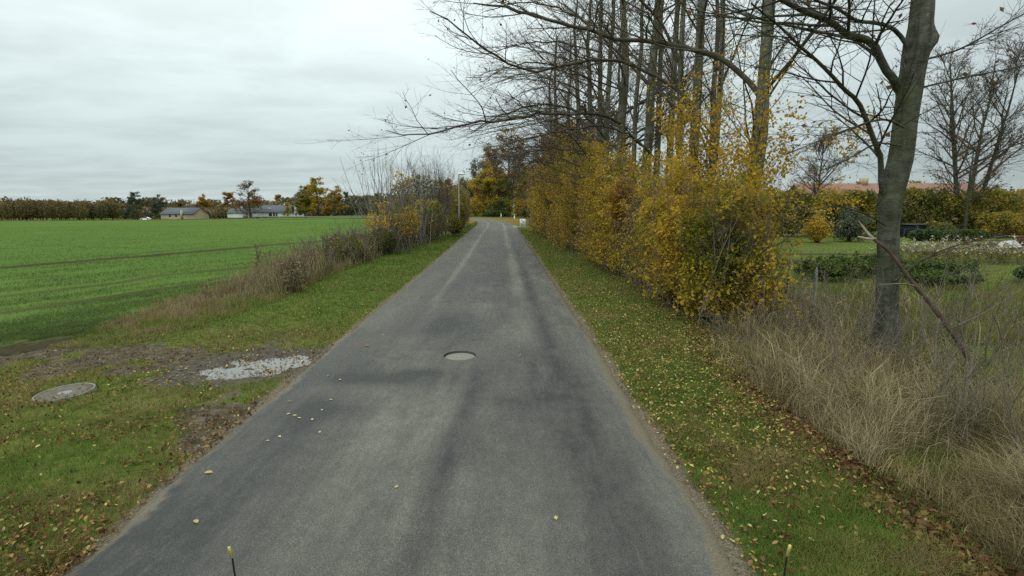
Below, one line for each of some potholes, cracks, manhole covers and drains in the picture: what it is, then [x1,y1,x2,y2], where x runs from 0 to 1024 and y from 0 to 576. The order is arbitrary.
manhole cover [32,383,97,403]
manhole cover [443,351,476,360]
